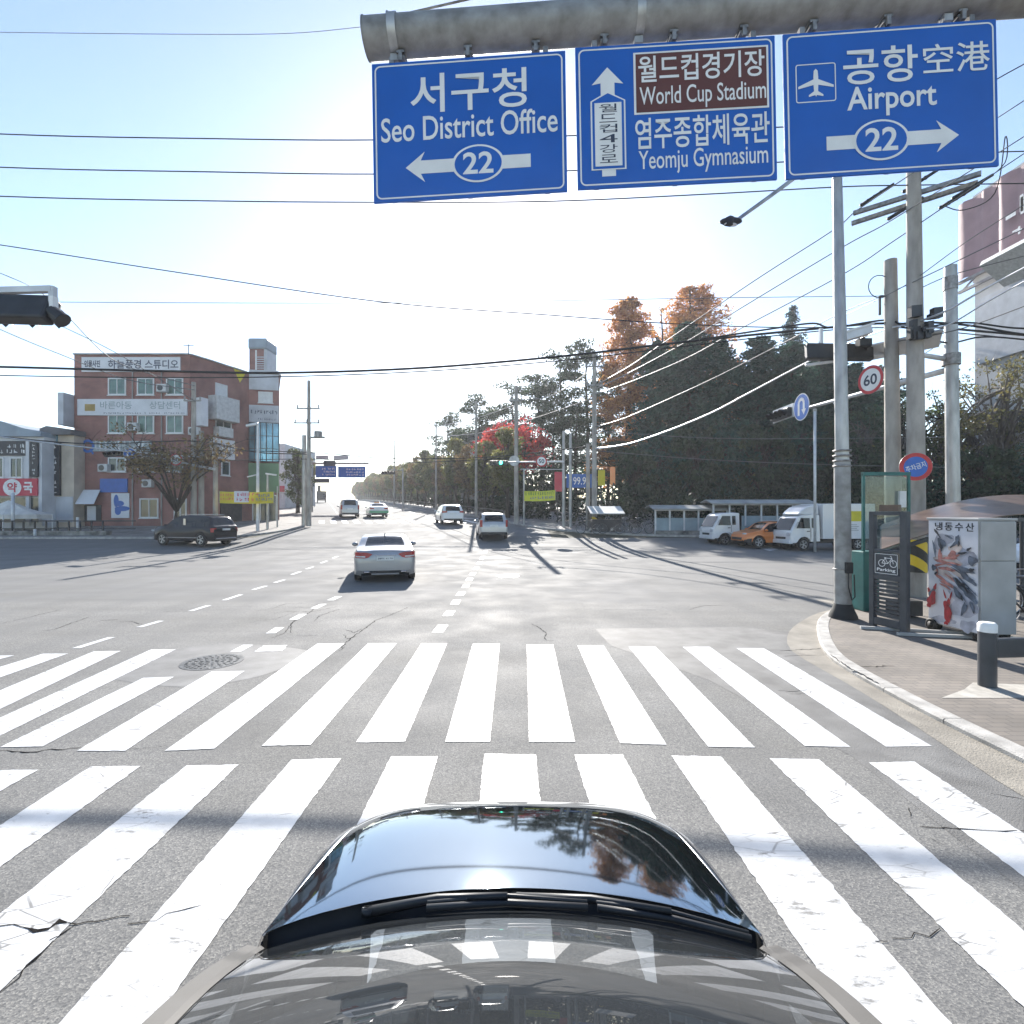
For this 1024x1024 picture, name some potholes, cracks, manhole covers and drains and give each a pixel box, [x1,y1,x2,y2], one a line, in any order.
crack [0,876,203,991]
crack [908,808,1023,840]
manhole cover [179,654,244,670]
